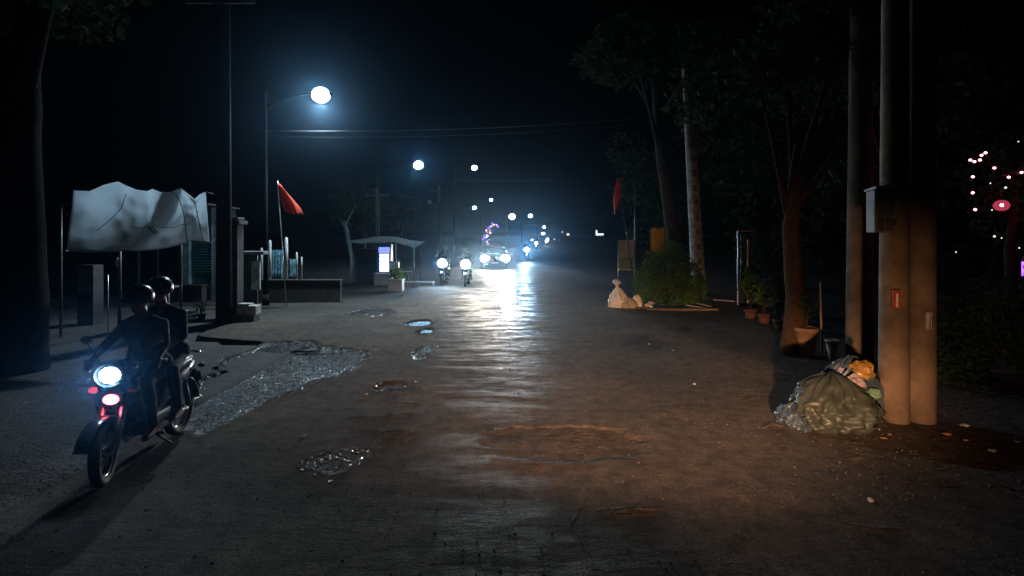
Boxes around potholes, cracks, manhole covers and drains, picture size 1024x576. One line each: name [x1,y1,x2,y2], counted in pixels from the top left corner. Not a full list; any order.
pothole [407,344,439,361]
pothole [365,379,425,394]
pothole [341,308,401,318]
pothole [156,337,381,446]
pothole [415,327,436,335]
pothole [400,318,437,327]
pothole [287,443,374,483]
